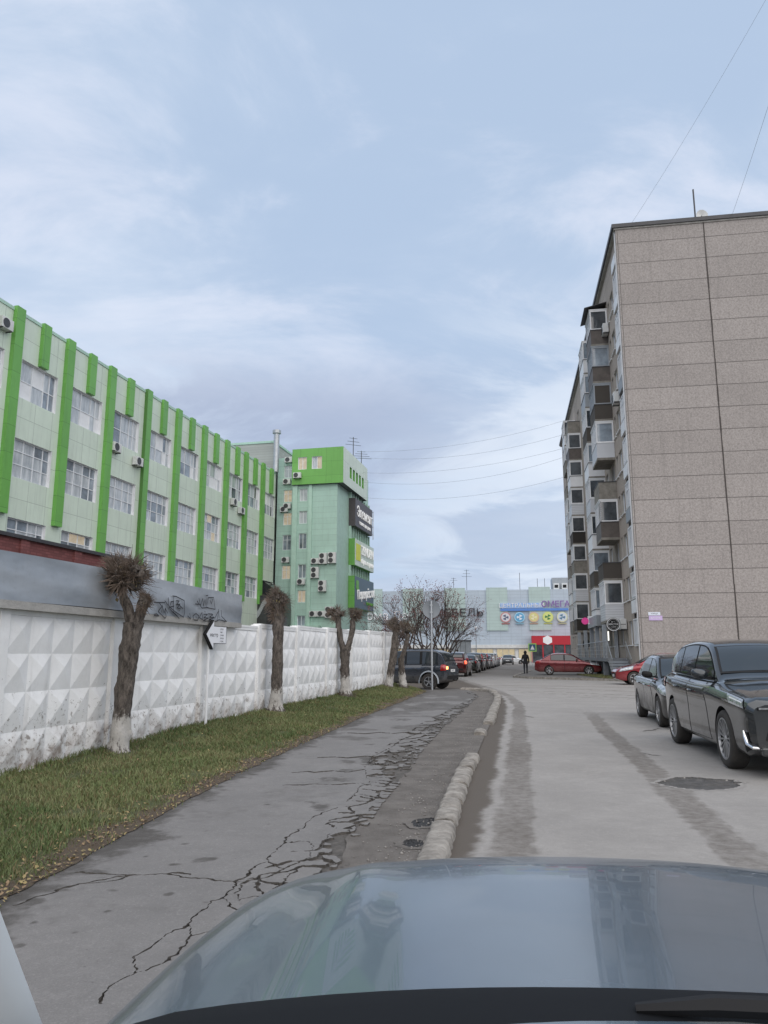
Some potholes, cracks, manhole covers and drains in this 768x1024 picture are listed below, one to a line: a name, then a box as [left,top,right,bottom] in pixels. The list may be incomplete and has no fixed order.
crack [13,692,478,1004]
